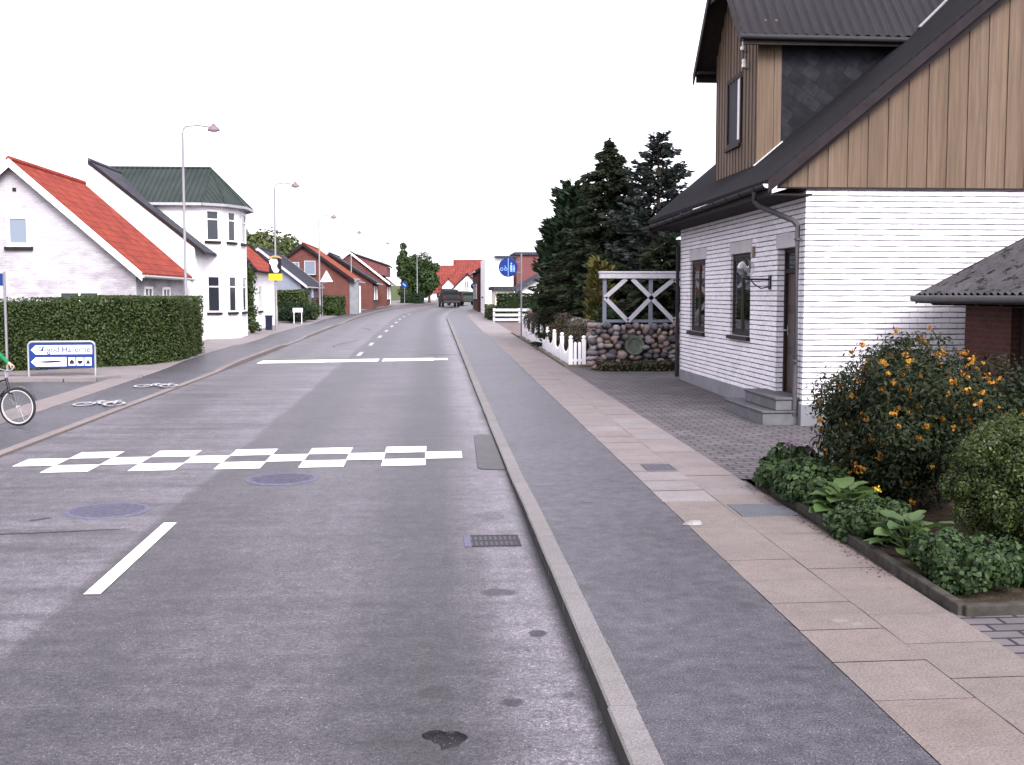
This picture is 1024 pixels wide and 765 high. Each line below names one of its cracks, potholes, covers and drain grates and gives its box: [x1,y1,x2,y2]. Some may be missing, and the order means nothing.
utility cover [727,503,799,517]
utility cover [640,464,677,472]
pothole [421,730,468,750]
manhole cover [63,502,150,519]
drain grate [463,534,522,547]
manhole cover [245,472,319,485]
